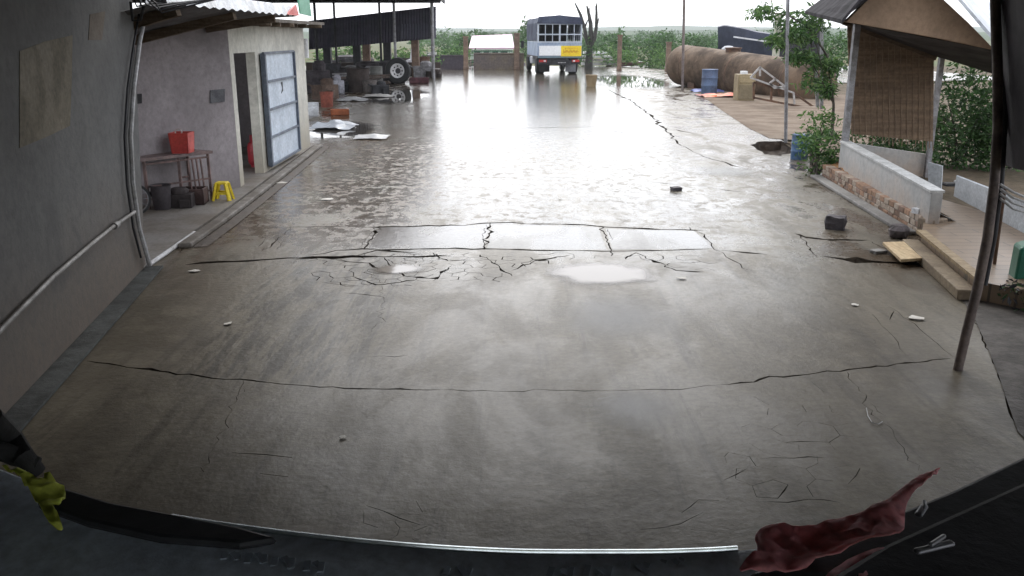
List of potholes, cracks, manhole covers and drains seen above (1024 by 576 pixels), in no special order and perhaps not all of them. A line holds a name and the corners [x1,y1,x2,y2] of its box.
pothole [751,141,791,156]
crack [797,234,919,264]
crack [89,317,950,503]
crack [311,222,761,357]
crack [549,92,776,192]
